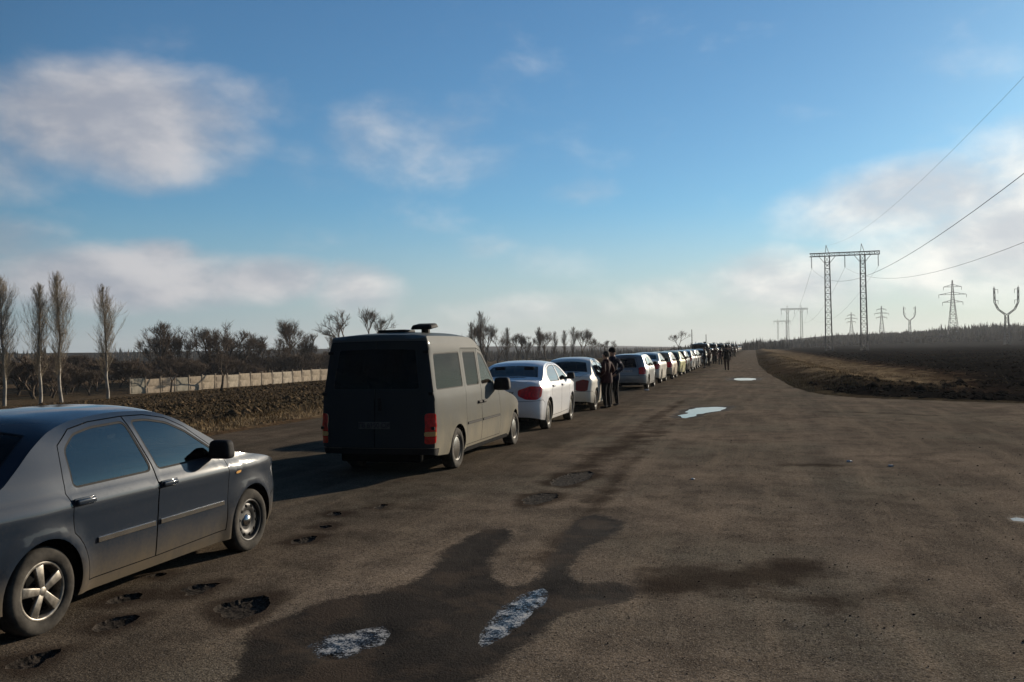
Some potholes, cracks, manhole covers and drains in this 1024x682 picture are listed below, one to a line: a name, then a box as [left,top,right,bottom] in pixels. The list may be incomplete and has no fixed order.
pothole [213,595,270,620]
pothole [181,583,220,596]
pothole [91,615,140,632]
pothole [291,536,317,544]
pothole [550,471,594,486]
pothole [5,648,62,670]
pothole [105,593,142,604]
pothole [522,493,559,505]
